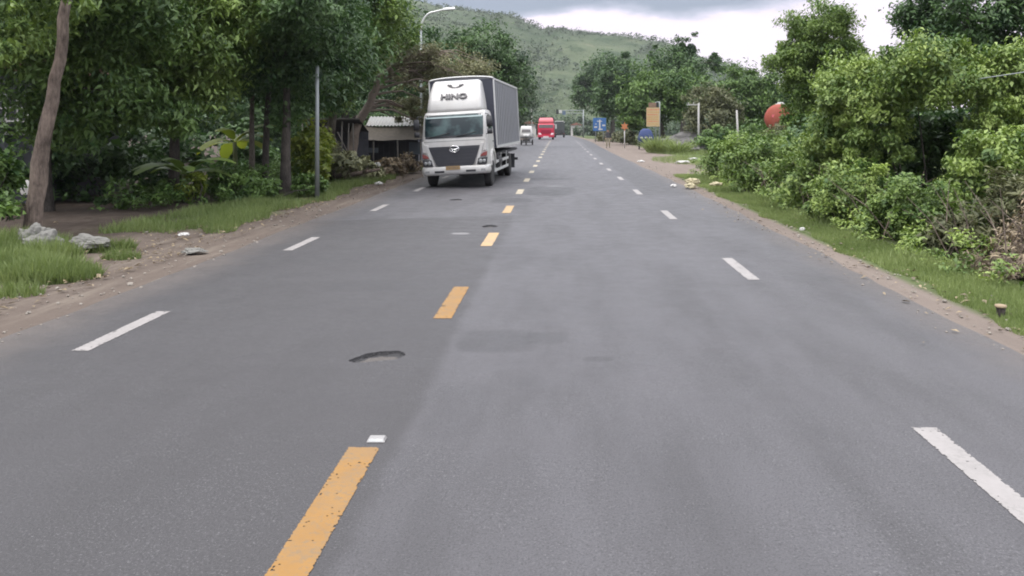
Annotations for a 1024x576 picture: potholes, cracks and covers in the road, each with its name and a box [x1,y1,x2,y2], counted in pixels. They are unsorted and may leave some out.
pothole [349,351,405,362]
